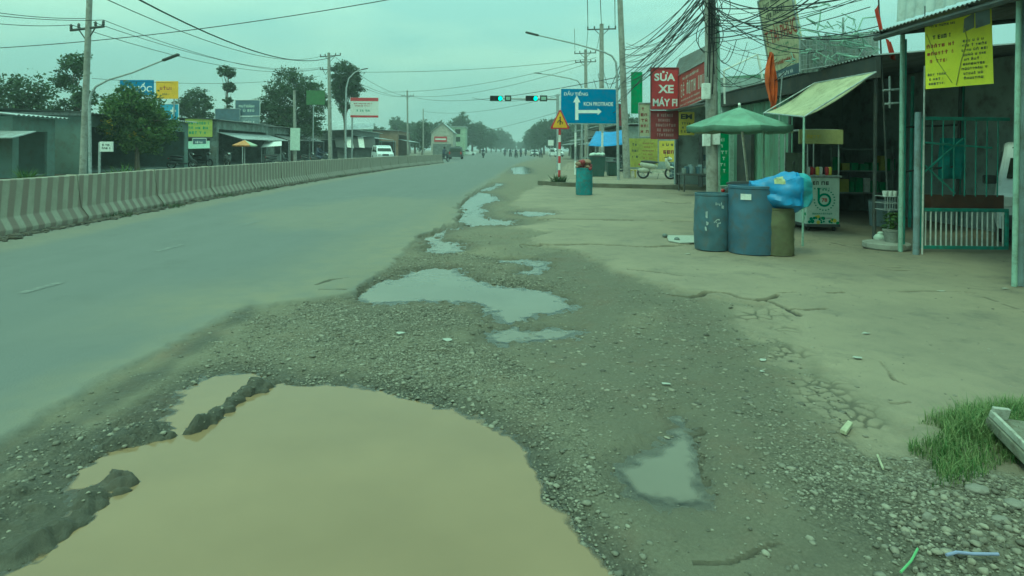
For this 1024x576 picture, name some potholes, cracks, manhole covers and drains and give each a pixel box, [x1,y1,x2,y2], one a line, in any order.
pothole [494,255,561,276]
pothole [448,191,524,228]
crack [691,541,786,566]
pothole [411,223,476,256]
pothole [0,361,658,576]
crack [627,269,918,459]
pothole [466,322,596,349]
pothole [507,208,563,217]
pothole [336,264,594,325]
pothole [590,408,737,520]
